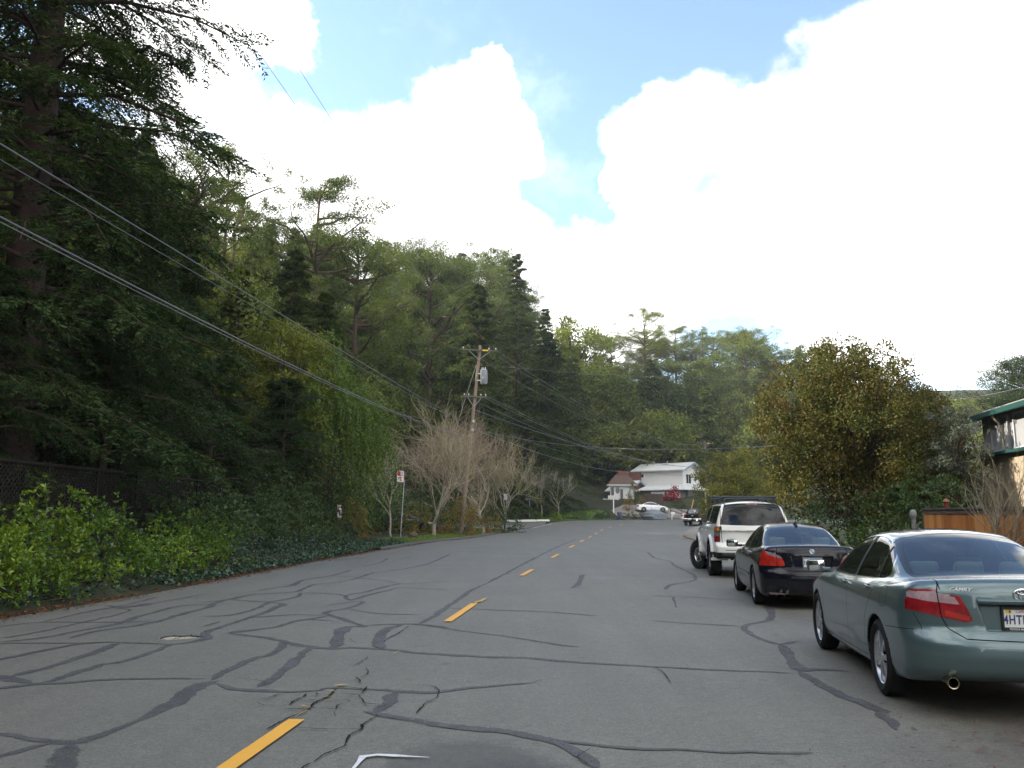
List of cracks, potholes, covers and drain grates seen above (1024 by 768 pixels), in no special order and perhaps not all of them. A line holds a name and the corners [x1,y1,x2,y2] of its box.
crack [239,638,377,768]
